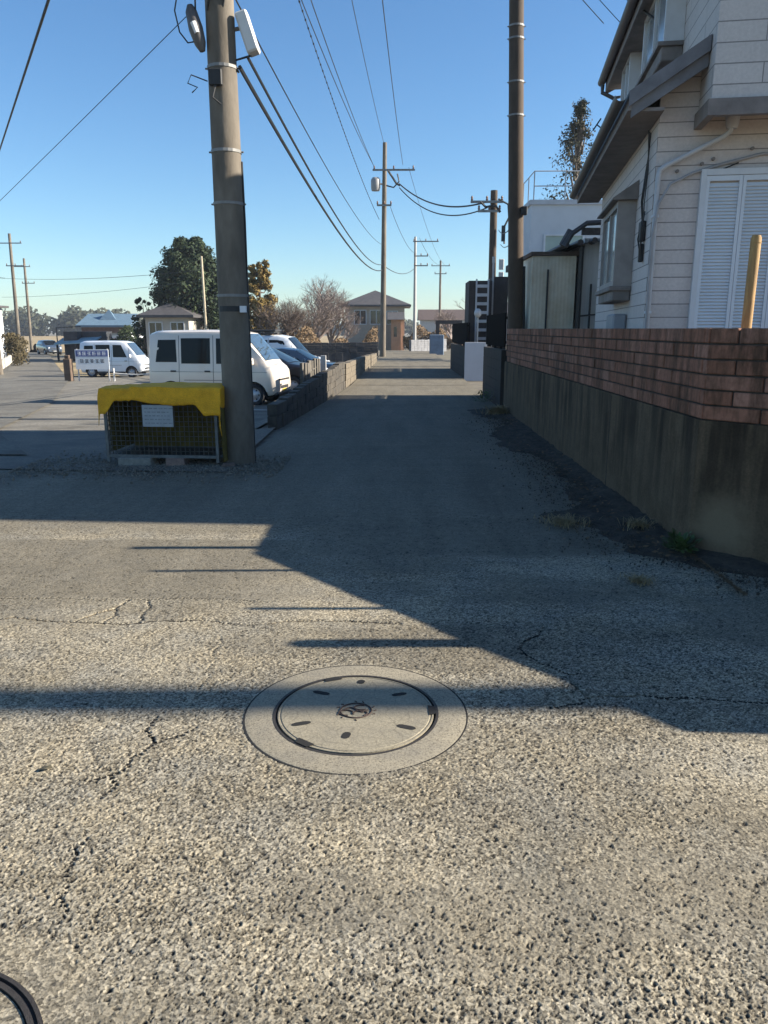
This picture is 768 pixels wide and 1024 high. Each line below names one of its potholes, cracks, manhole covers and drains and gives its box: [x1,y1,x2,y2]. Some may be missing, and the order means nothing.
crack [89,717,196,799]
crack [0,600,400,626]
crack [516,626,768,709]
manhole cover [243,665,468,776]
crack [59,838,87,911]
